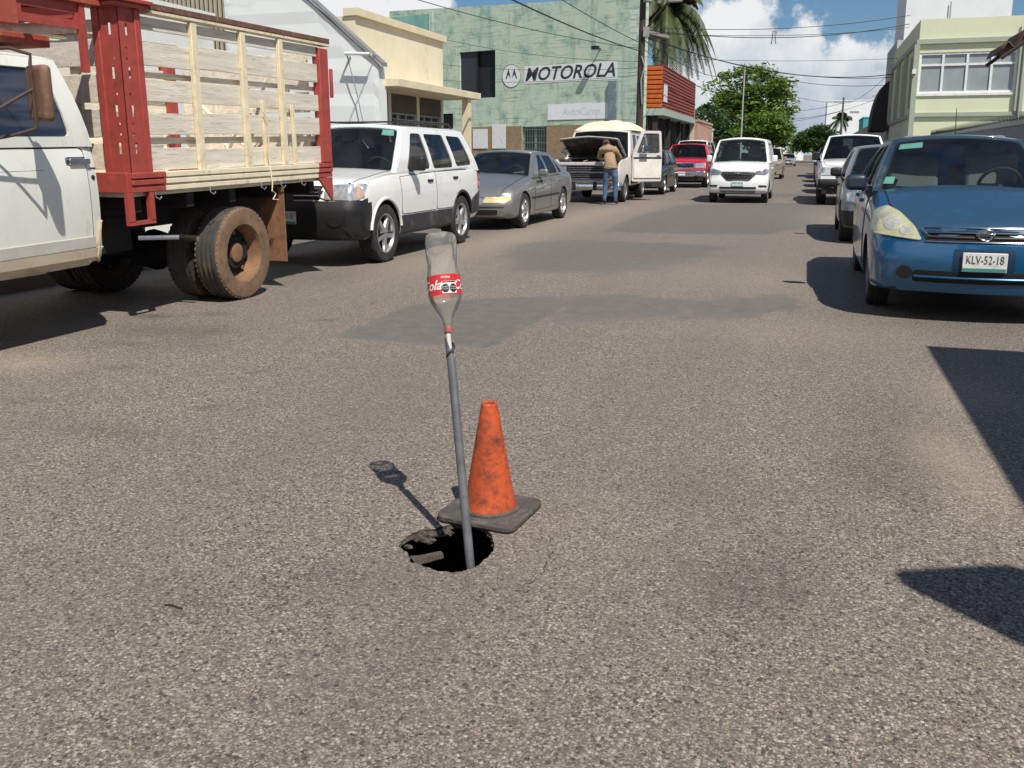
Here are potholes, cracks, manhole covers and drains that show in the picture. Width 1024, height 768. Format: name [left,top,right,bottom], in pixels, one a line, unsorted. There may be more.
crack [516,531,554,596]
pothole [399,524,495,573]
